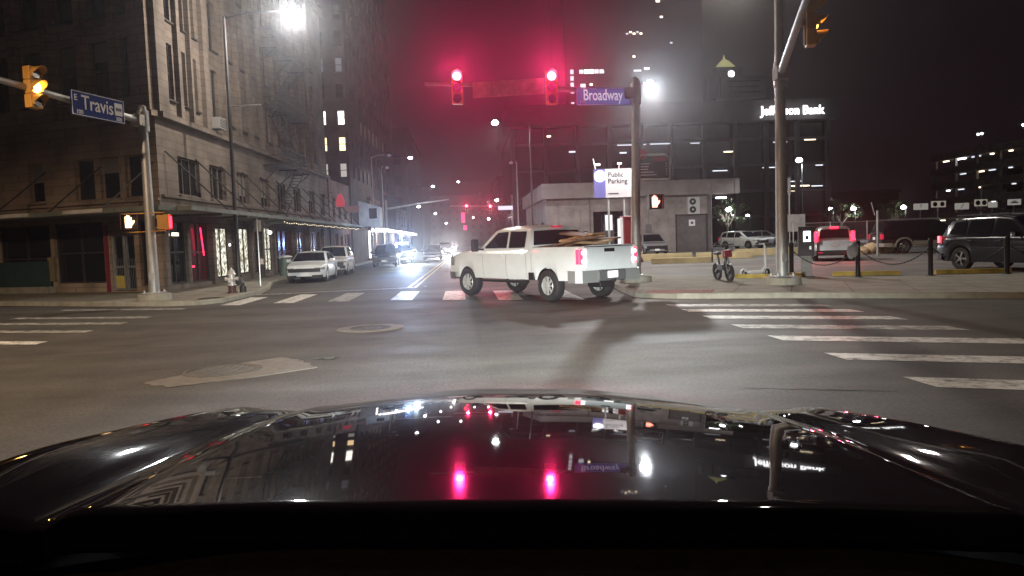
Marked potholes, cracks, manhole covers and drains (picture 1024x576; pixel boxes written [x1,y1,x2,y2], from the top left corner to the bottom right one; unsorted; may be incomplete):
manhole cover [336,324,404,332]
